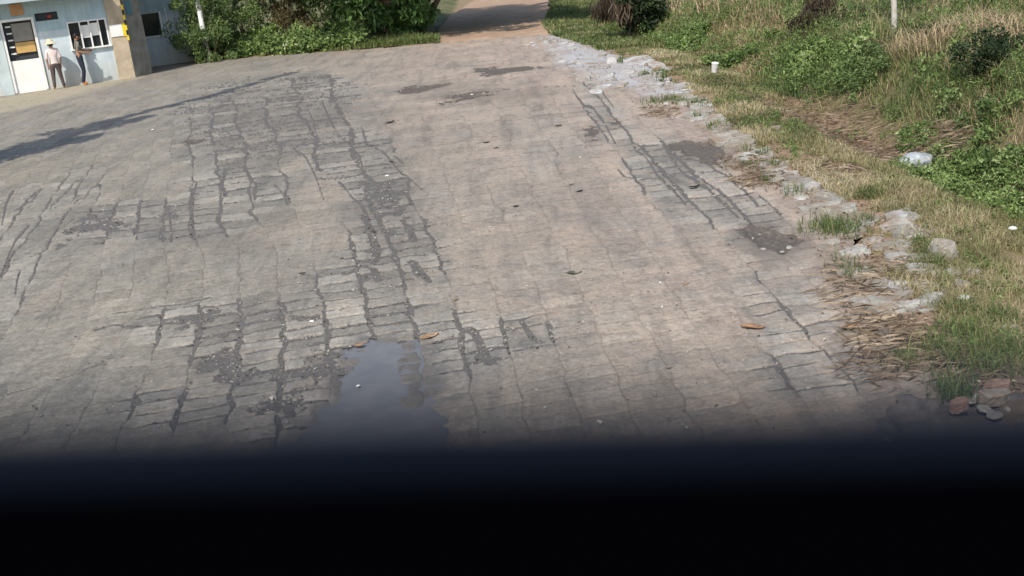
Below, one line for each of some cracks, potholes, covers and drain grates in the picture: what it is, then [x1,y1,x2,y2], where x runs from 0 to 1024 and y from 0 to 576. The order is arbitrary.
crack [0,68,451,313]
crack [492,82,787,230]
